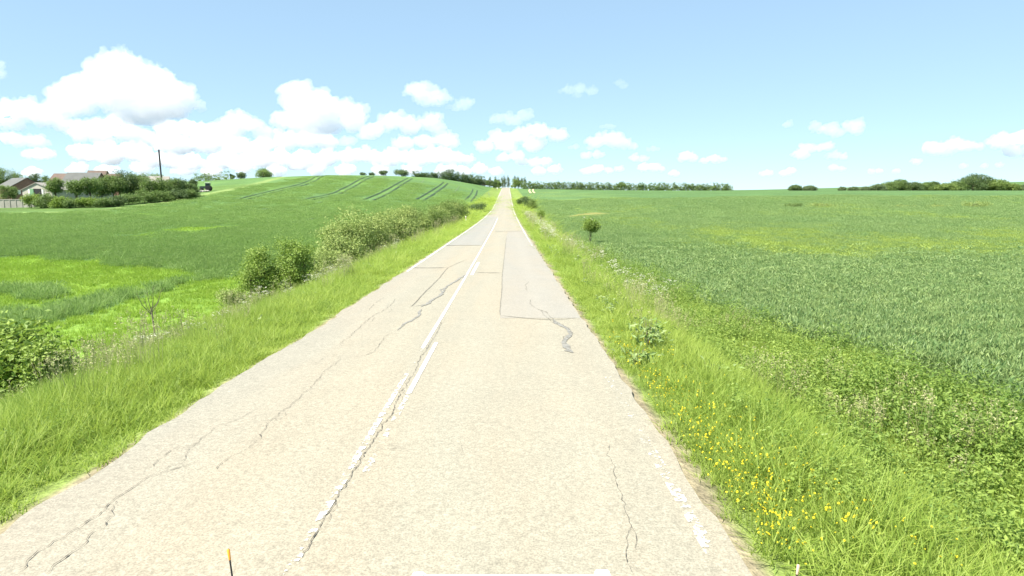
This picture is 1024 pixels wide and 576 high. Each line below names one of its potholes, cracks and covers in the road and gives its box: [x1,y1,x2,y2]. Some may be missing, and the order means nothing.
crack [217,275,466,554]
crack [606,450,637,569]
crack [533,306,576,353]
crack [25,419,237,573]
